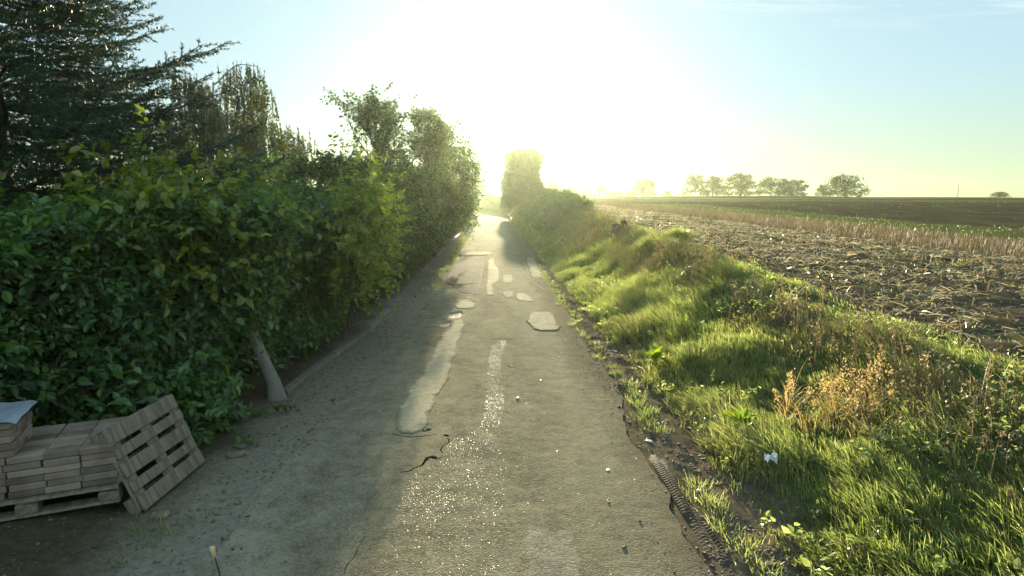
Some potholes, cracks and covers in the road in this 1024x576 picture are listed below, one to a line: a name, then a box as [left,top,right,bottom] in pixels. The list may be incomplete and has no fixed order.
crack [394,434,450,473]
